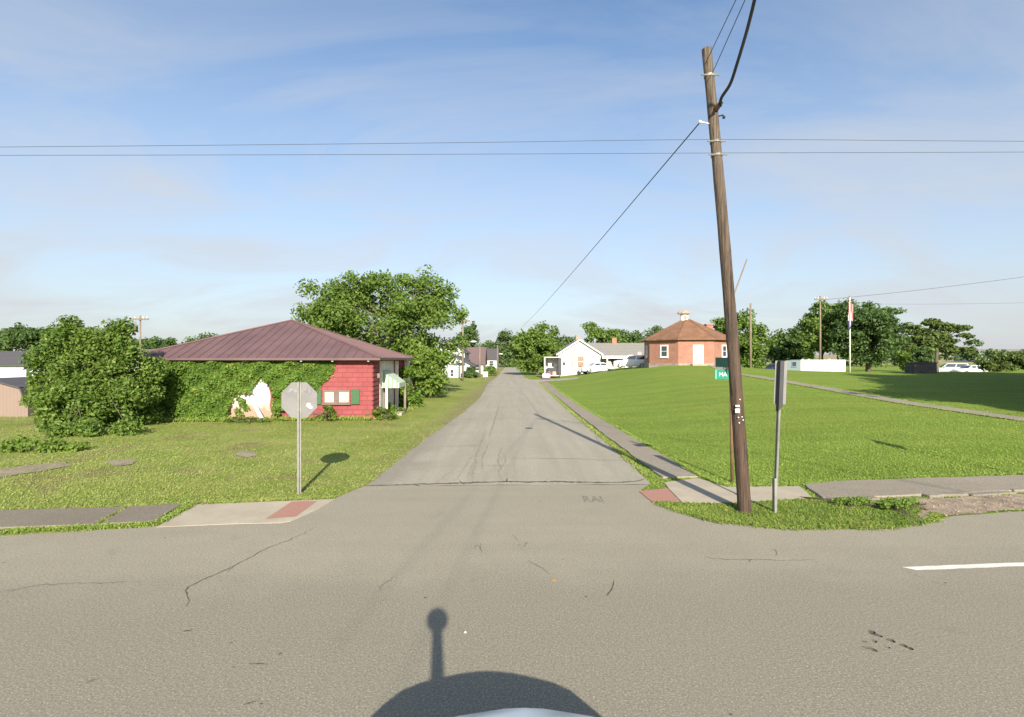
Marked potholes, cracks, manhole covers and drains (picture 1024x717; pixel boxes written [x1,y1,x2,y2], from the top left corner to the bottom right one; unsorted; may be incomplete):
crack [712,549,809,562]
crack [0,581,143,592]
pothole [862,630,914,652]
crack [185,530,309,607]
